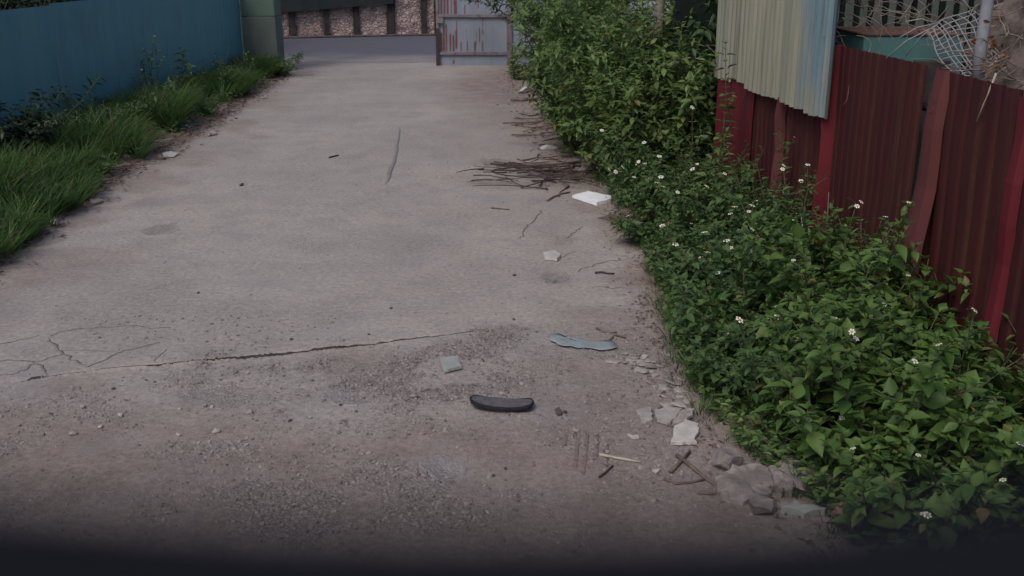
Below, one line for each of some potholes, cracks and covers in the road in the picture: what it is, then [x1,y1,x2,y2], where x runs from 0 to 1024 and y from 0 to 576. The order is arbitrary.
crack [0,325,171,376]
crack [562,226,632,289]
